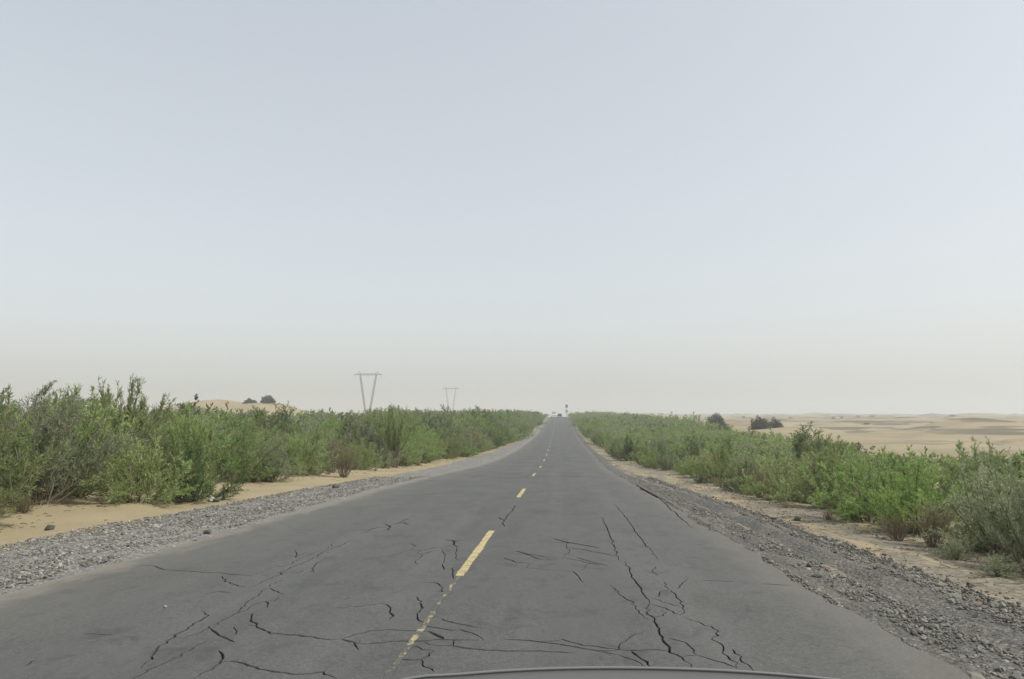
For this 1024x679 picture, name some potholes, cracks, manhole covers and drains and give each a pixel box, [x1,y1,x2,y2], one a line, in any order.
crack [132,484,754,679]
